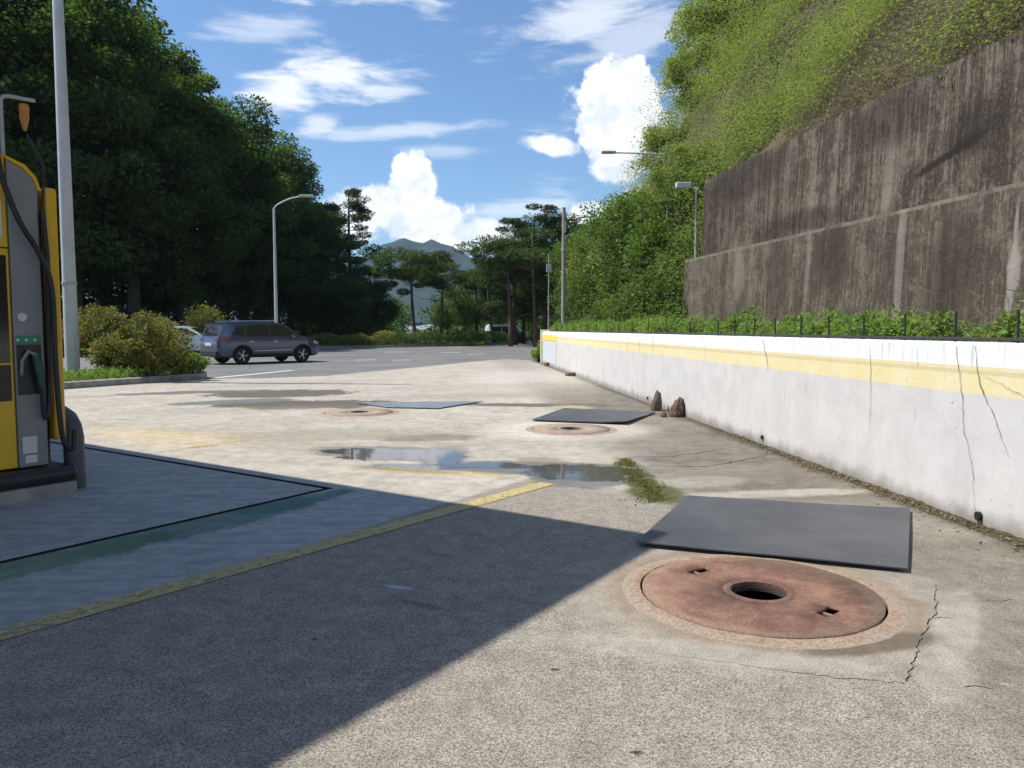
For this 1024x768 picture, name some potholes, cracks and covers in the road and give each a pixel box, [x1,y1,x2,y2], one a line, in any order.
crack [619,448,766,467]
manhole cover [622,554,910,649]
manhole cover [525,423,617,436]
manhole cover [319,408,400,417]
crack [653,583,947,684]
